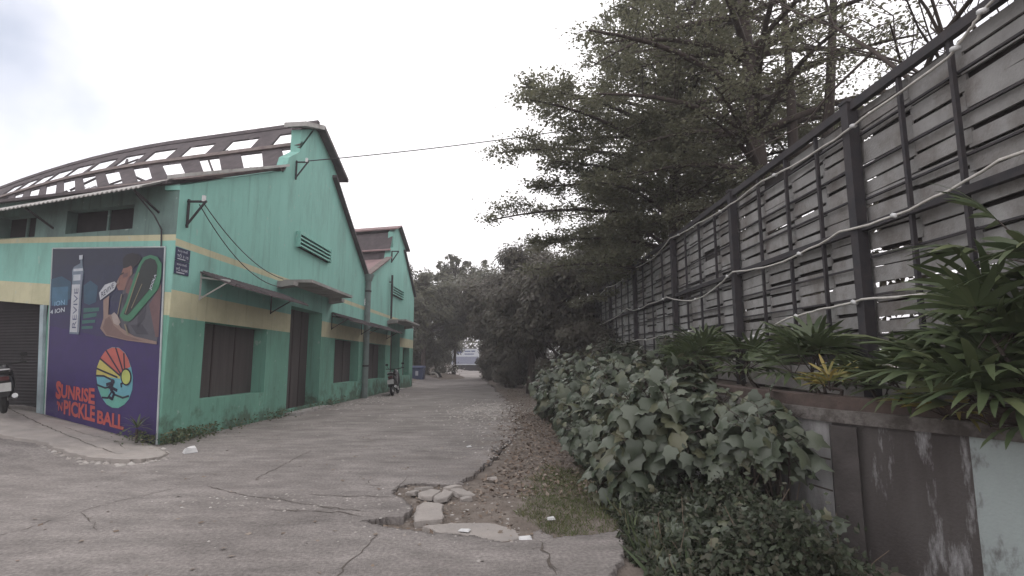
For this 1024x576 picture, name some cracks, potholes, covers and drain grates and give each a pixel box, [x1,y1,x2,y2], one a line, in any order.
crack [532,542,560,575]
crack [209,452,409,517]
crack [337,535,378,576]
pothole [386,483,543,542]
